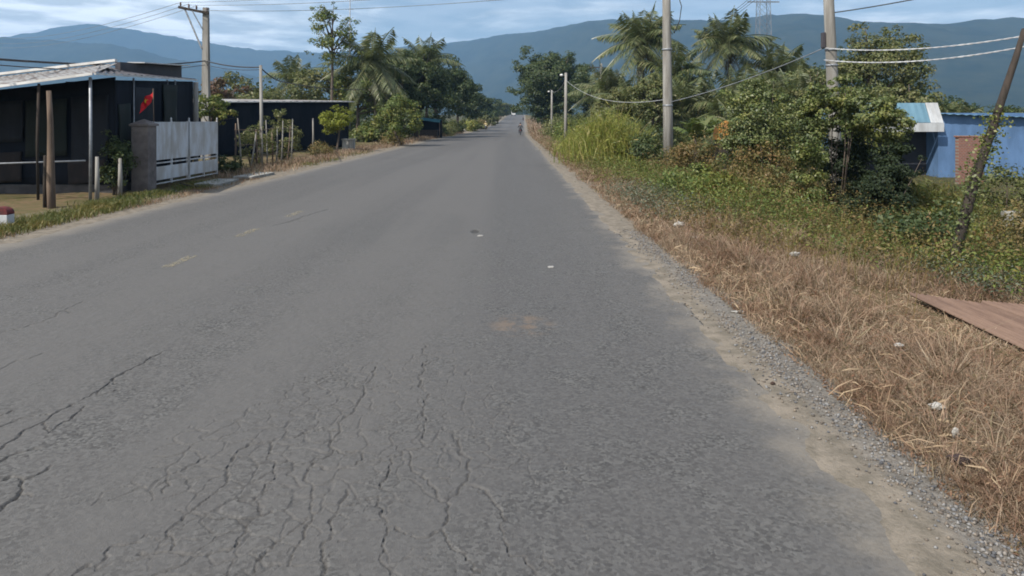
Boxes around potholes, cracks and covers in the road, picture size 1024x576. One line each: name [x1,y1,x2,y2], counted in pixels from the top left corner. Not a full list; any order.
crack [0,344,597,576]
